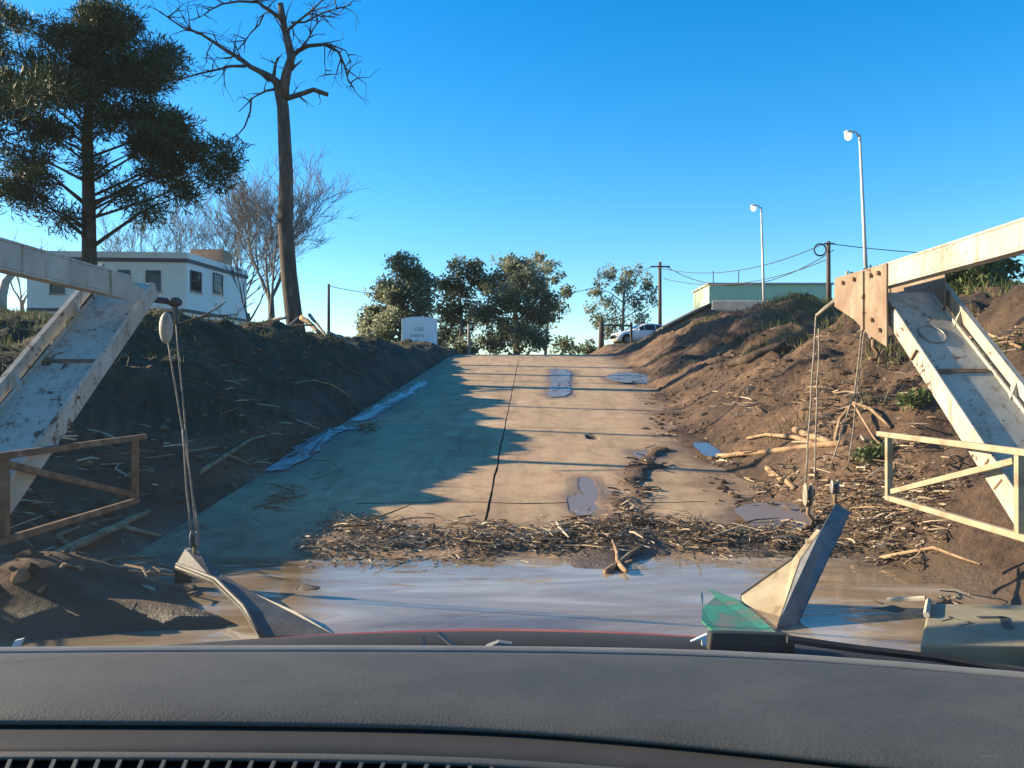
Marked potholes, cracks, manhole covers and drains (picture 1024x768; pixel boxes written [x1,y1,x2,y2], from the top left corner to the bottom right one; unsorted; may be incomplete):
crack [356,359,705,528]
pothole [562,477,615,517]
pothole [576,433,603,441]
